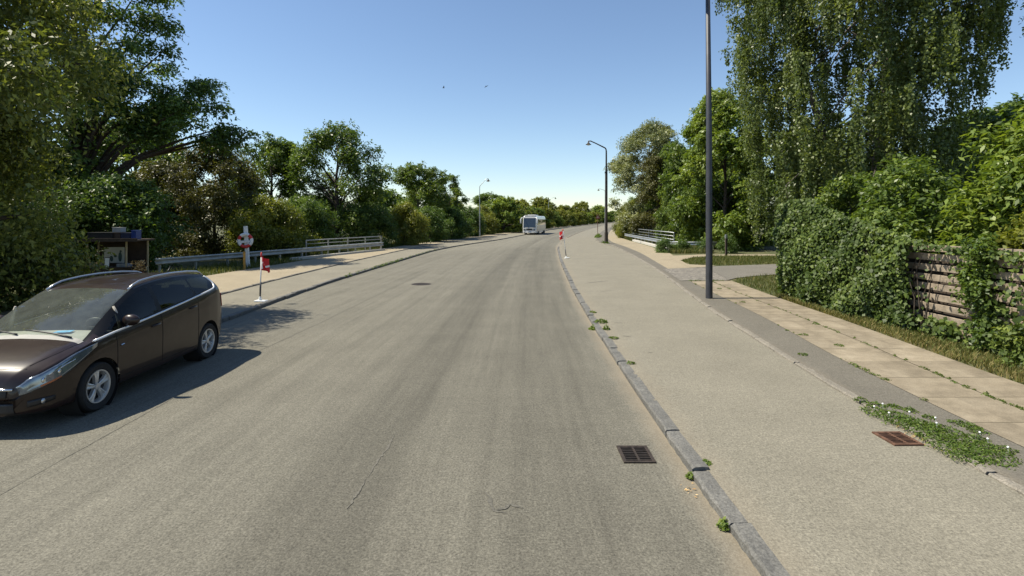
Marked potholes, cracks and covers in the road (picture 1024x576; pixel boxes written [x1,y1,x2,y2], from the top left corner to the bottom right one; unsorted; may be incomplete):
crack [484,492,523,513]
crack [346,434,395,509]
drain grate [616,445,656,464]
drain grate [872,431,924,446]
